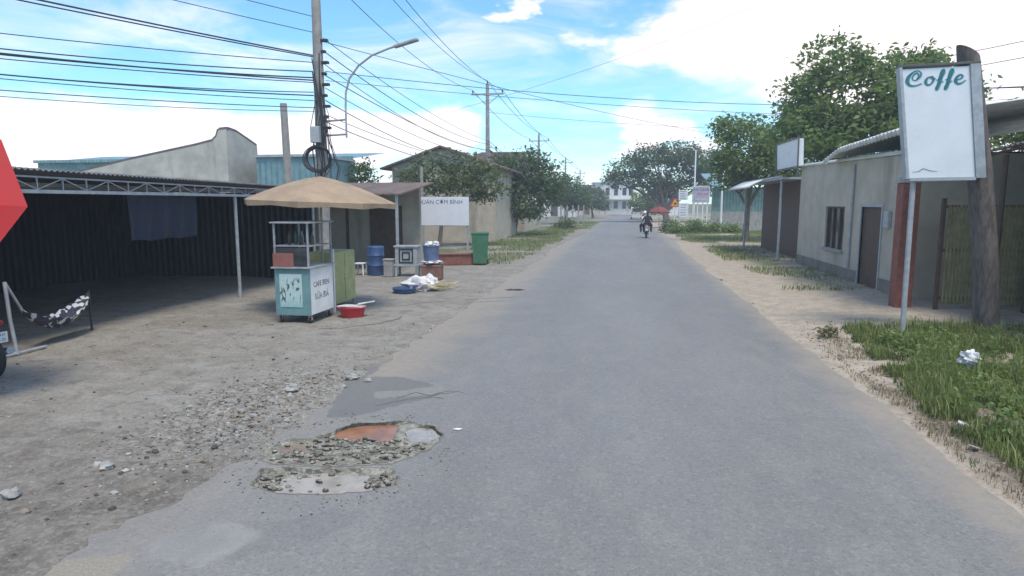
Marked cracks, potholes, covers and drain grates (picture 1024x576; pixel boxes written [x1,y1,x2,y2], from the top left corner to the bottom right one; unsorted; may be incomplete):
pothole [259,420,444,468]
crack [376,391,463,406]
pothole [250,466,400,495]
